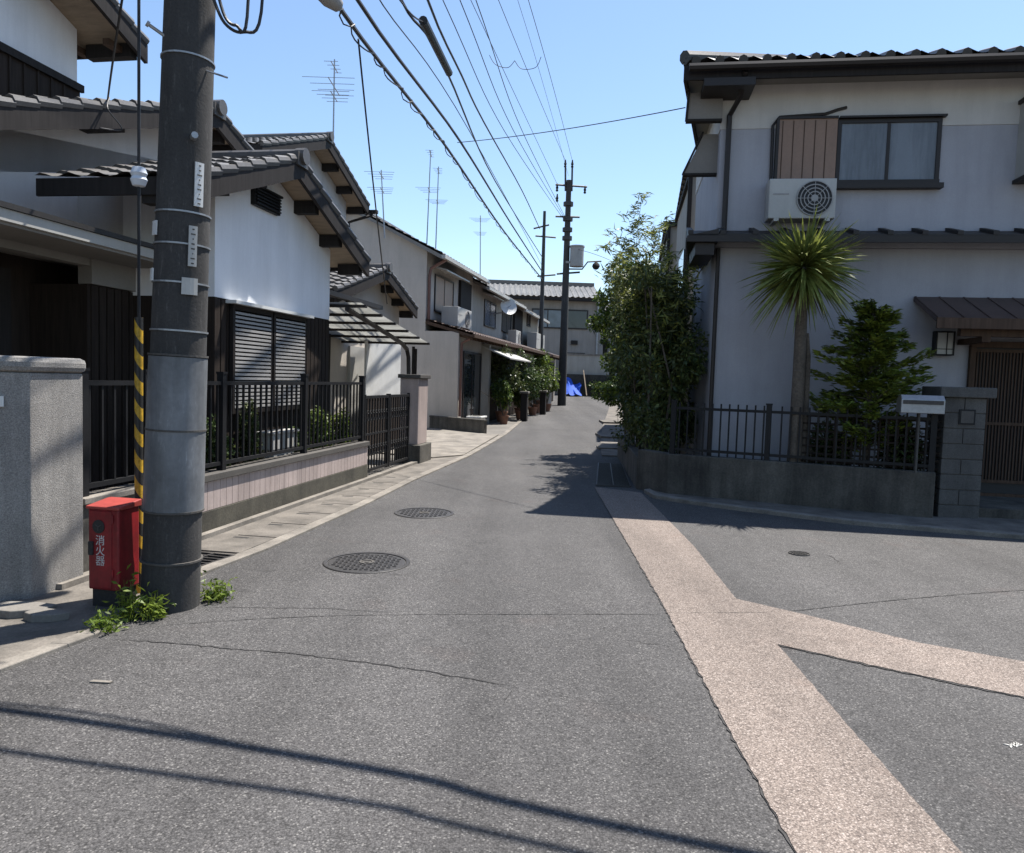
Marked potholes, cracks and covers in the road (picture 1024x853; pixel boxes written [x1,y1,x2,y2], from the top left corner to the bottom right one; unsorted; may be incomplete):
drain grate [201,552,235,566]
drain grate [596,462,631,487]
manhole cover [394,507,454,519]
crack [125,607,514,707]
crack [791,590,1017,611]
manhole cover [323,552,410,574]
